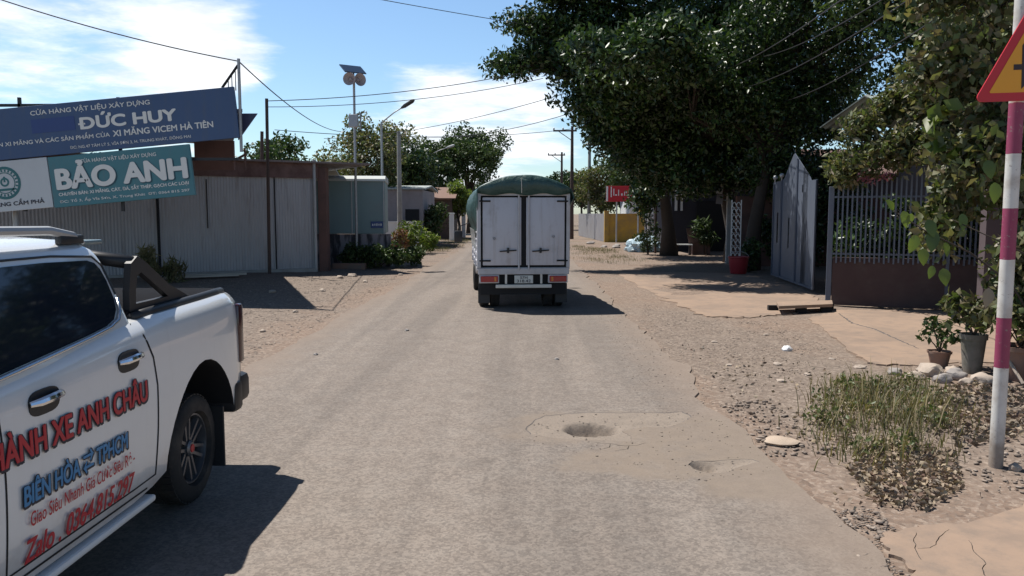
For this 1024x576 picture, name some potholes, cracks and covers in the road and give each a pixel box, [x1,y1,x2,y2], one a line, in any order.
pothole [688,459,759,473]
pothole [526,411,691,441]
